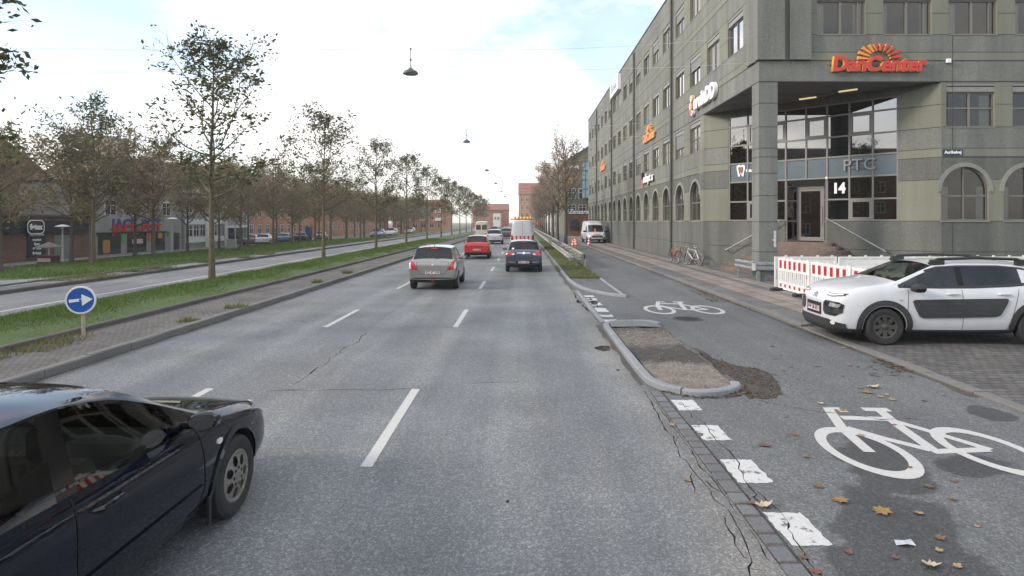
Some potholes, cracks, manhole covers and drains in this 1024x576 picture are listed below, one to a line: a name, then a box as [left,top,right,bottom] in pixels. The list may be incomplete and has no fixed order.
crack [265,333,410,392]
crack [645,392,823,576]
